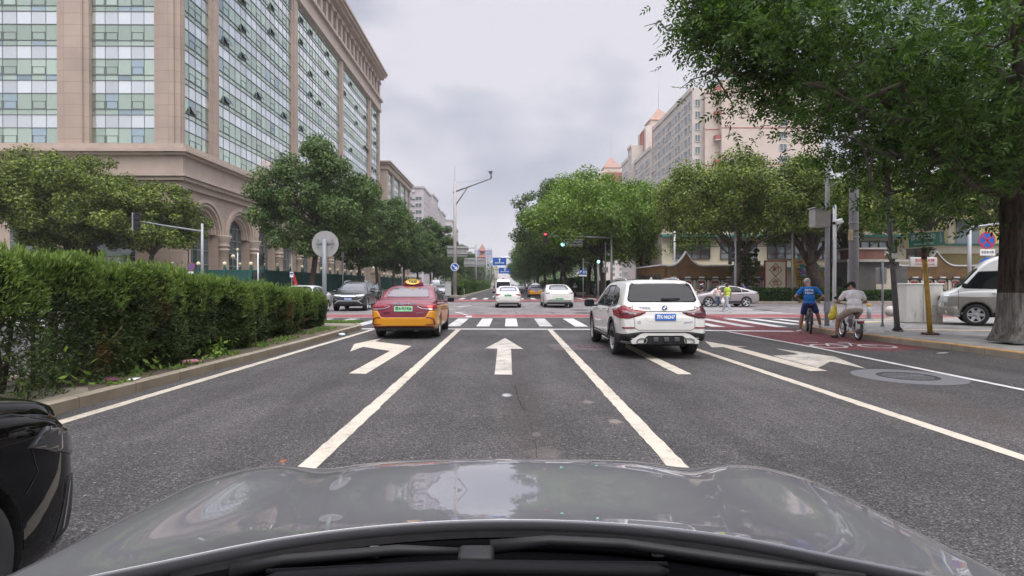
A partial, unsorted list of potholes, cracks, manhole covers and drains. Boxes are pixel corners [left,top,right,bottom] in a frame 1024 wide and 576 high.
crack [513,383,537,458]
manhole cover [850,369,971,385]
